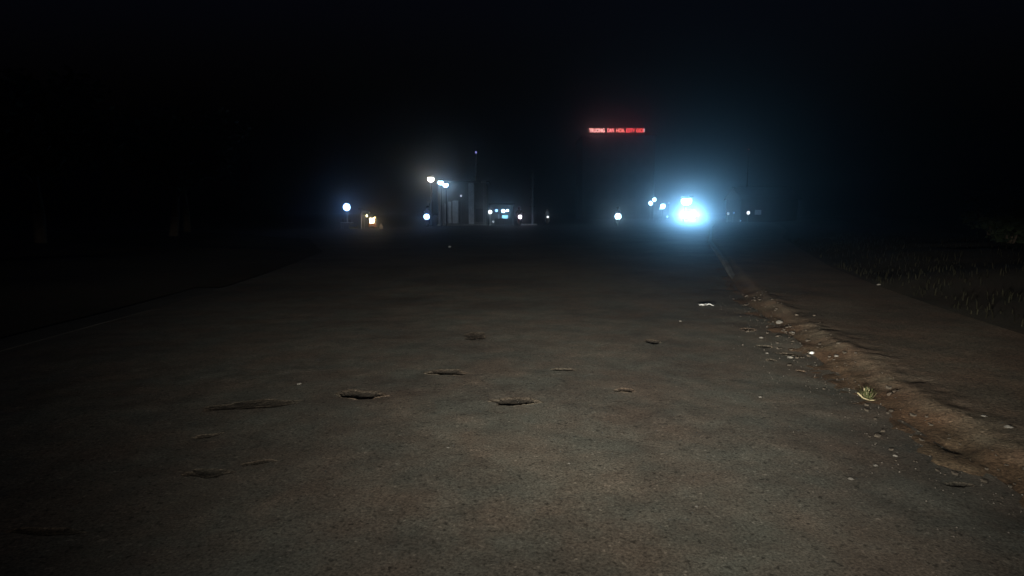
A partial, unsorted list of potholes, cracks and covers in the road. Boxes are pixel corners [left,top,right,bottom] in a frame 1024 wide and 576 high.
pothole [201,399,305,412]
pothole [335,389,390,400]
pothole [488,397,544,406]
pothole [180,468,236,479]
pothole [463,332,486,340]
pothole [6,527,88,536]
